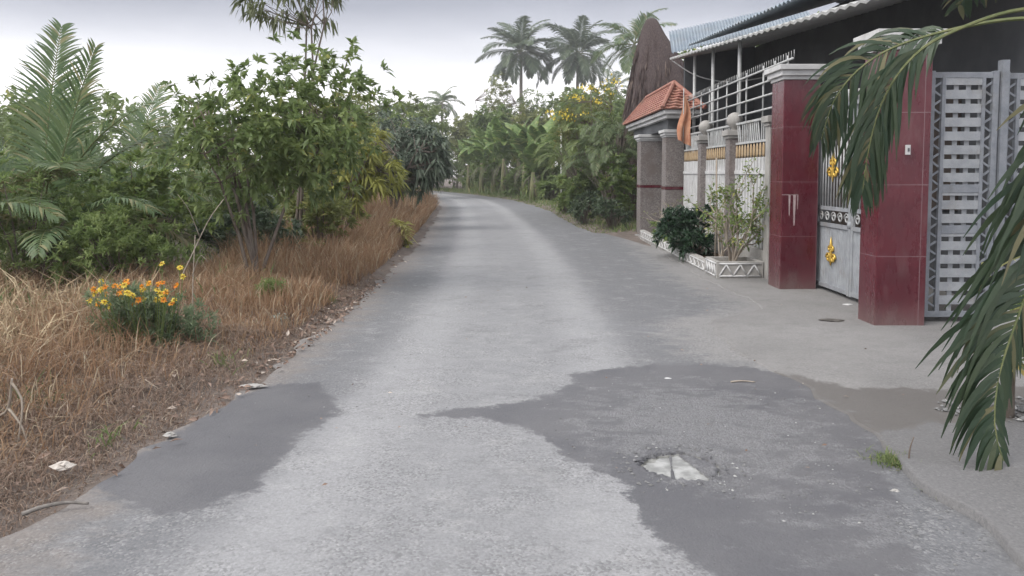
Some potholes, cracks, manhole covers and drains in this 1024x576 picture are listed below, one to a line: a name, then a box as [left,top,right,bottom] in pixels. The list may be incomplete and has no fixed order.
pothole [632,450,731,485]
